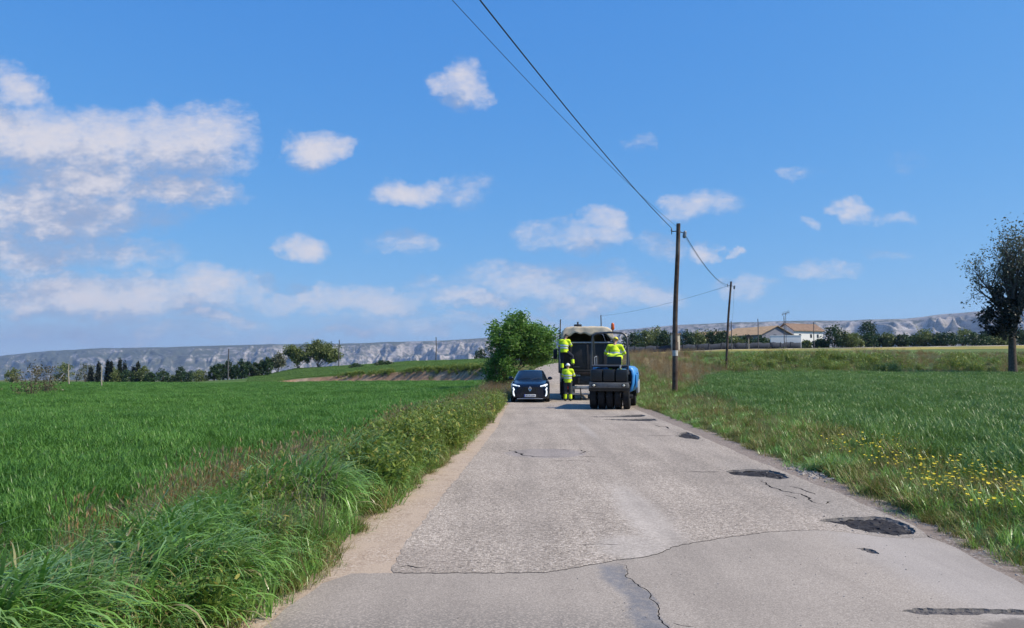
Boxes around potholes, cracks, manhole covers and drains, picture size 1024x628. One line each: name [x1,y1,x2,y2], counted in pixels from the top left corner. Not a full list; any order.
pothole [821,516,916,538]
crack [761,481,830,504]
pothole [726,469,789,479]
